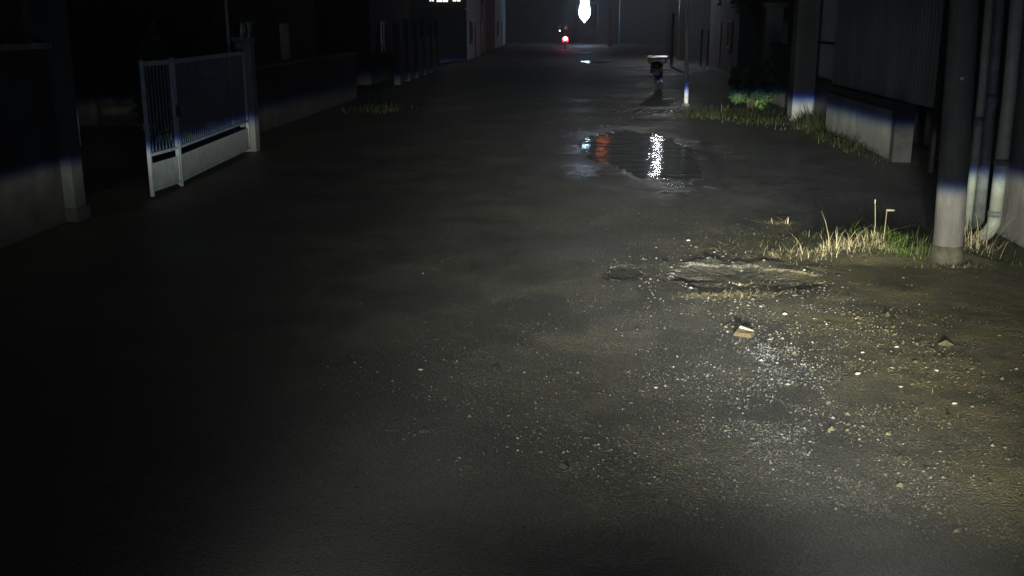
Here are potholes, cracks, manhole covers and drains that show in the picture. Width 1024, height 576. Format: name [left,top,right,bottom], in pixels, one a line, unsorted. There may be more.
pothole [664,262,830,297]
pothole [603,264,649,281]
